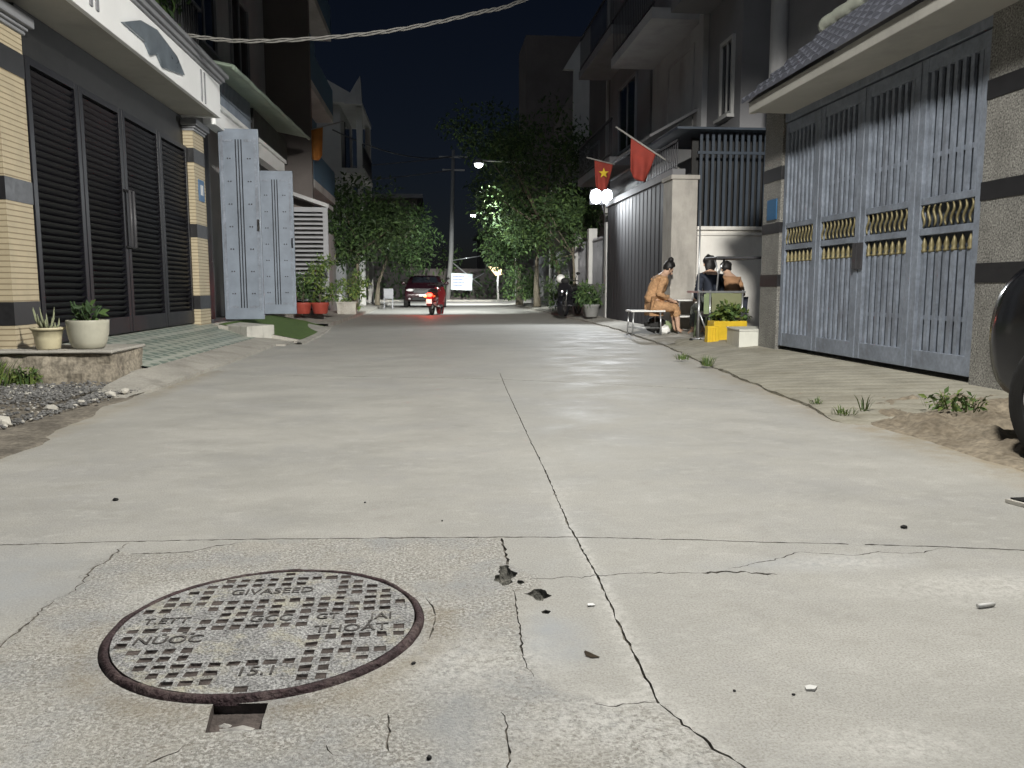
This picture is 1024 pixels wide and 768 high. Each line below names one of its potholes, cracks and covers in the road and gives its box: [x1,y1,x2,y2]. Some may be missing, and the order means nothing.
crack [514,547,946,677]
pothole [525,589,552,601]
manhole cover [97,569,424,733]
pothole [494,565,517,586]
crack [594,702,746,768]
crack [0,543,236,647]
crack [501,712,511,768]
